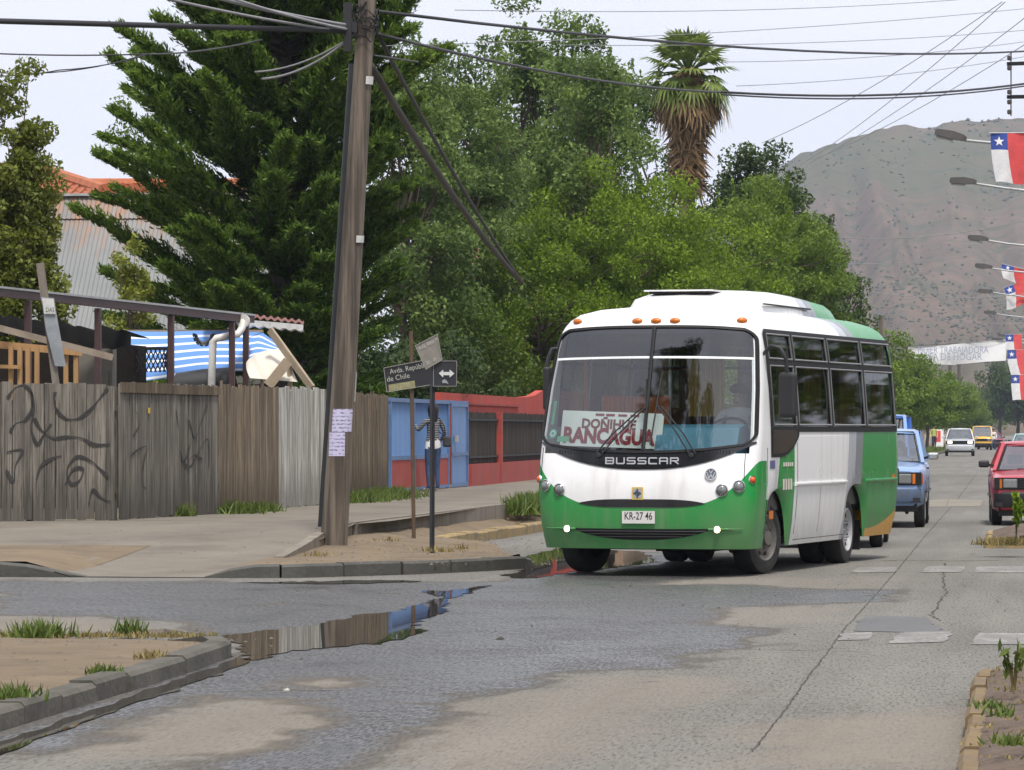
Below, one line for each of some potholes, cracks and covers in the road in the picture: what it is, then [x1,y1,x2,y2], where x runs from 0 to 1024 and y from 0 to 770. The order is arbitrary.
crack [885,560,999,621]
